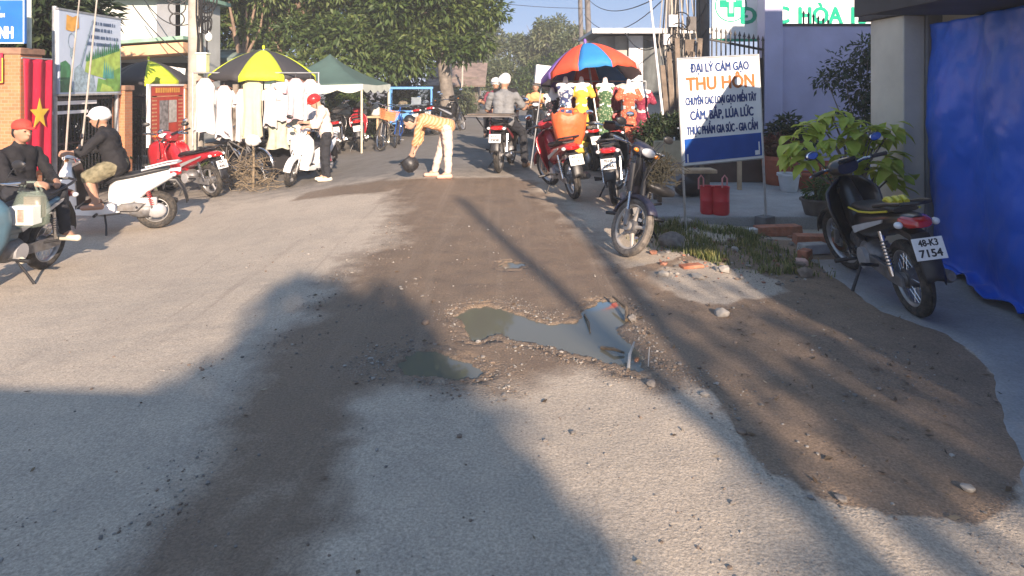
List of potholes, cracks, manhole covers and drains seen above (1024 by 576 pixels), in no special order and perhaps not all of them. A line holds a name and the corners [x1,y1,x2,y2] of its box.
pothole [492,259,532,272]
pothole [384,344,499,386]
pothole [445,296,662,379]
